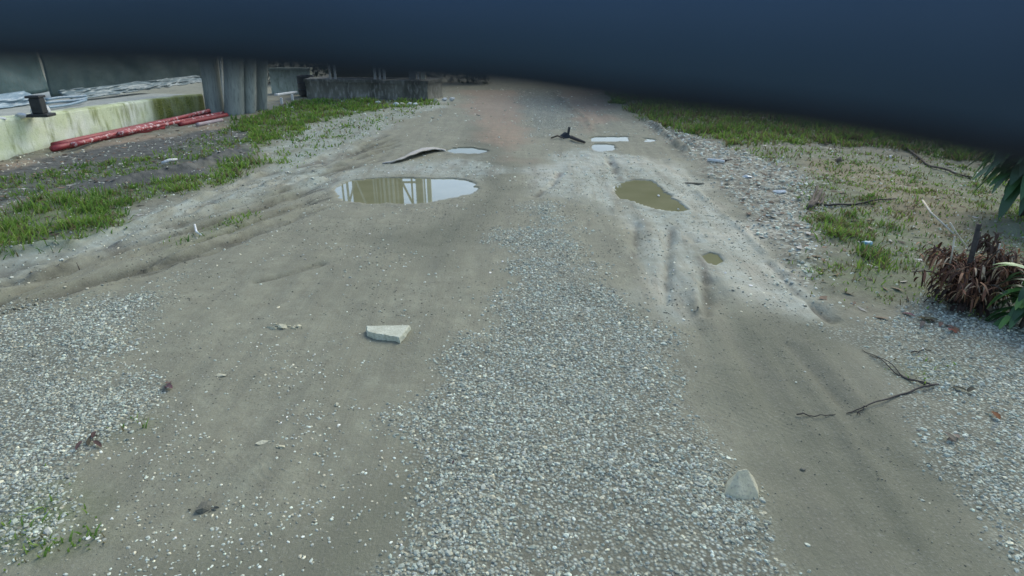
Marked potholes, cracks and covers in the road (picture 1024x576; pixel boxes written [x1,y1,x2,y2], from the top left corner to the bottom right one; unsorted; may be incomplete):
pothole [323,174,491,208]
pothole [582,135,647,143]
pothole [603,177,696,215]
pothole [436,145,496,156]
pothole [584,142,624,153]
